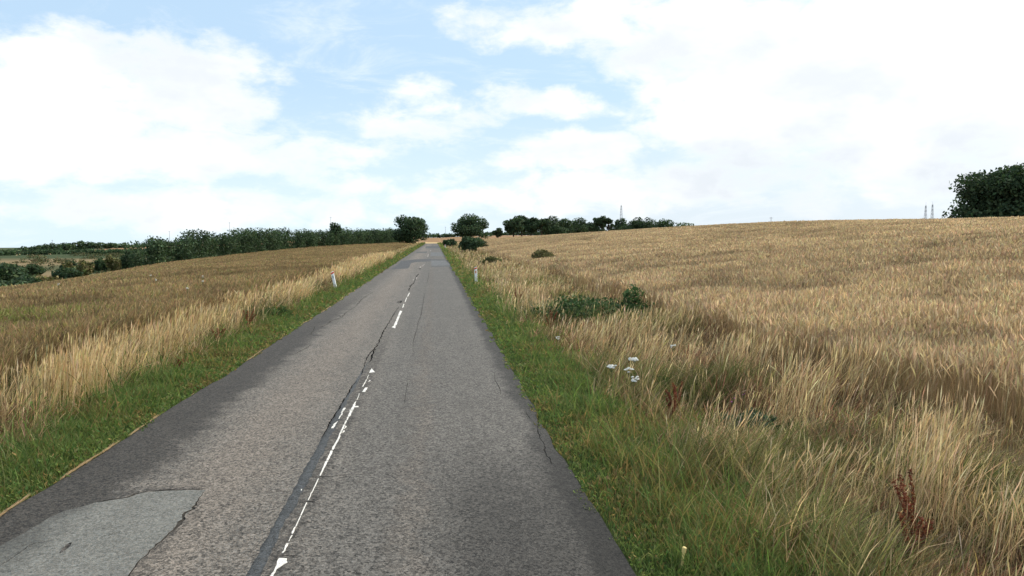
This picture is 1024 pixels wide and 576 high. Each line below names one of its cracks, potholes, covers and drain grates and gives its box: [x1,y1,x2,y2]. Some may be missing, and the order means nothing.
crack [322,308,398,436]
